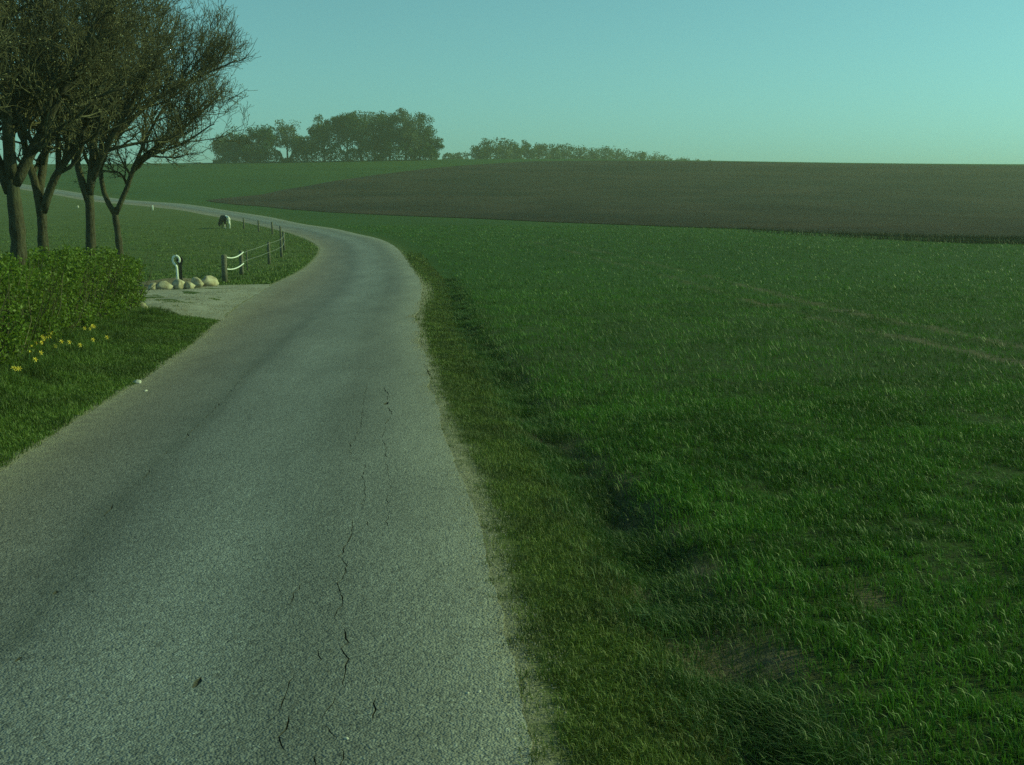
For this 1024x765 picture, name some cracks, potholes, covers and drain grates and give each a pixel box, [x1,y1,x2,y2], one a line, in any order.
crack [313,387,368,765]
crack [382,387,392,526]
crack [278,677,294,752]
